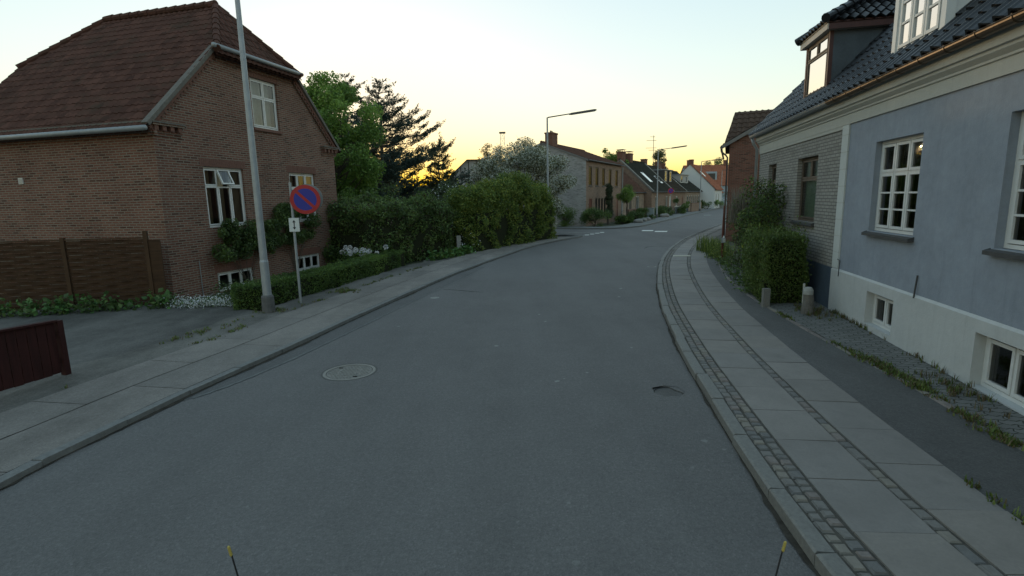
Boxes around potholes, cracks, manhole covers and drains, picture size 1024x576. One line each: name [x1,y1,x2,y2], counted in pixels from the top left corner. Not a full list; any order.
manhole cover [321,363,378,381]
